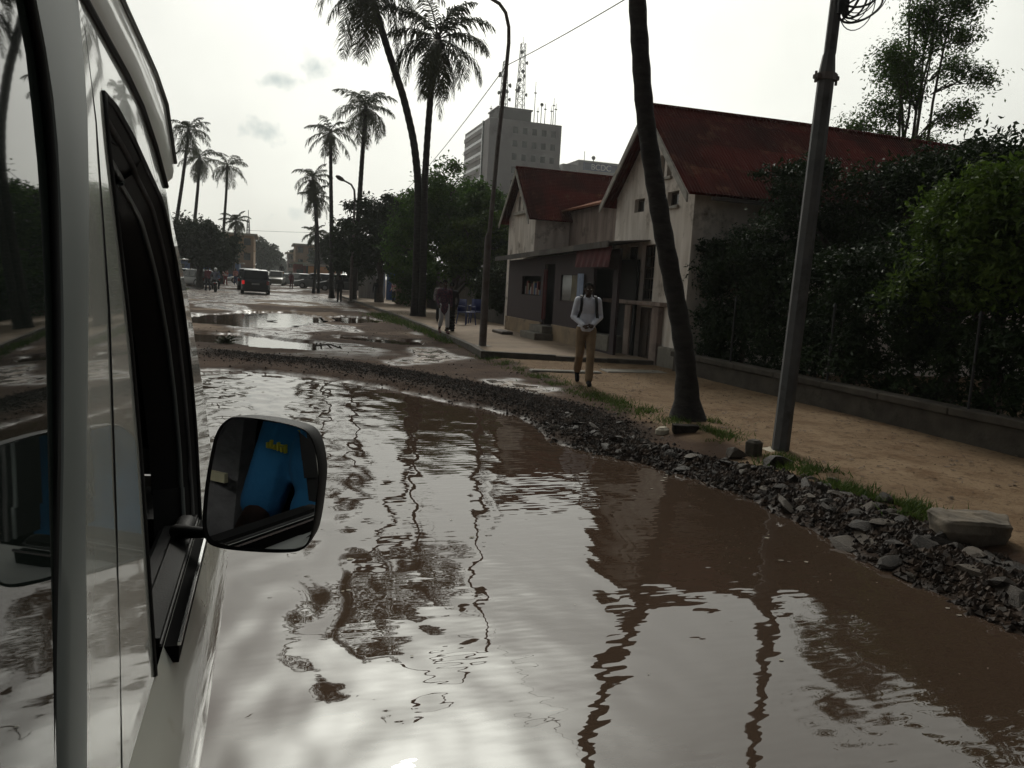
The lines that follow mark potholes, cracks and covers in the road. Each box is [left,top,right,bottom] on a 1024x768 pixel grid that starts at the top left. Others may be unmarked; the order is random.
pothole [194,330,331,351]
pothole [200,367,1024,637]
pothole [191,310,332,328]
pothole [329,334,431,345]
pothole [325,315,384,324]
